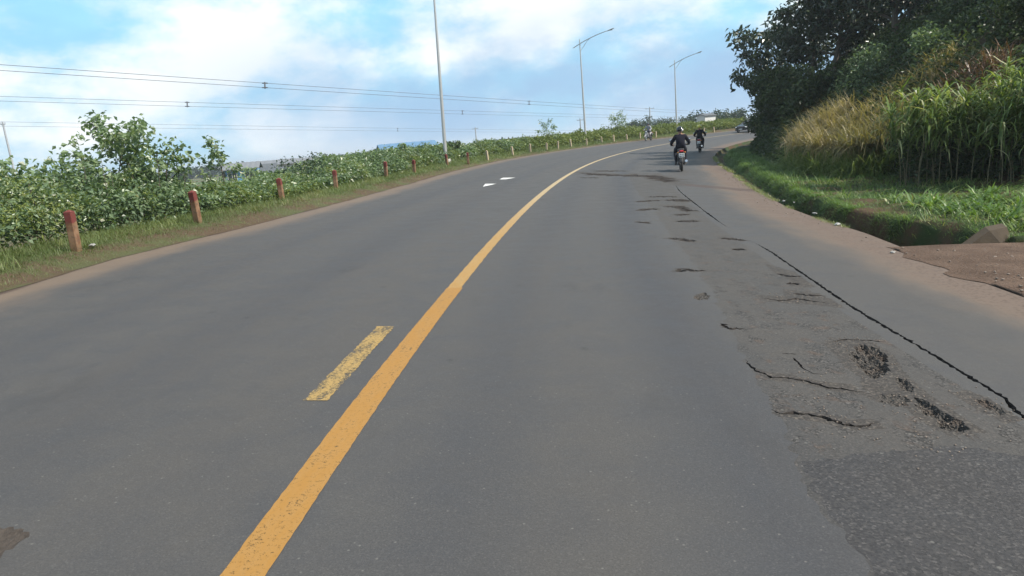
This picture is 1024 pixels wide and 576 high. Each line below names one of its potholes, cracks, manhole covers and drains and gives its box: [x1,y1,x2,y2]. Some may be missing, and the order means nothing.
pothole [0,527,30,558]
pothole [847,344,891,379]
pothole [894,378,915,393]
pothole [913,397,971,433]
pothole [972,398,1006,417]
crack [765,274,825,303]
crack [746,353,857,392]
crack [771,409,872,428]
